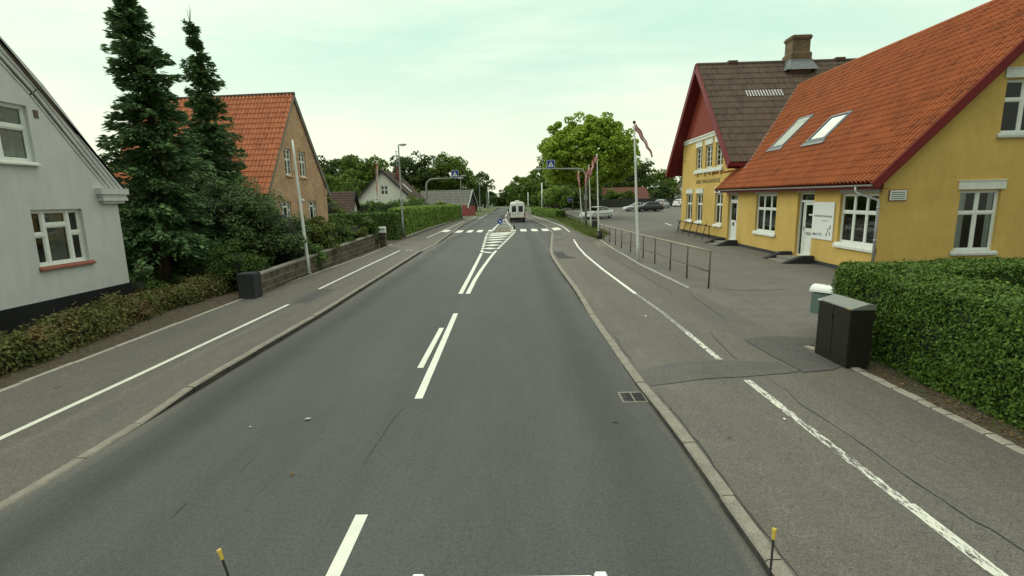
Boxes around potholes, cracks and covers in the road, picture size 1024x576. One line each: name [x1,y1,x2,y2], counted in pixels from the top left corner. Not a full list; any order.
drain grate [617,392,649,403]
